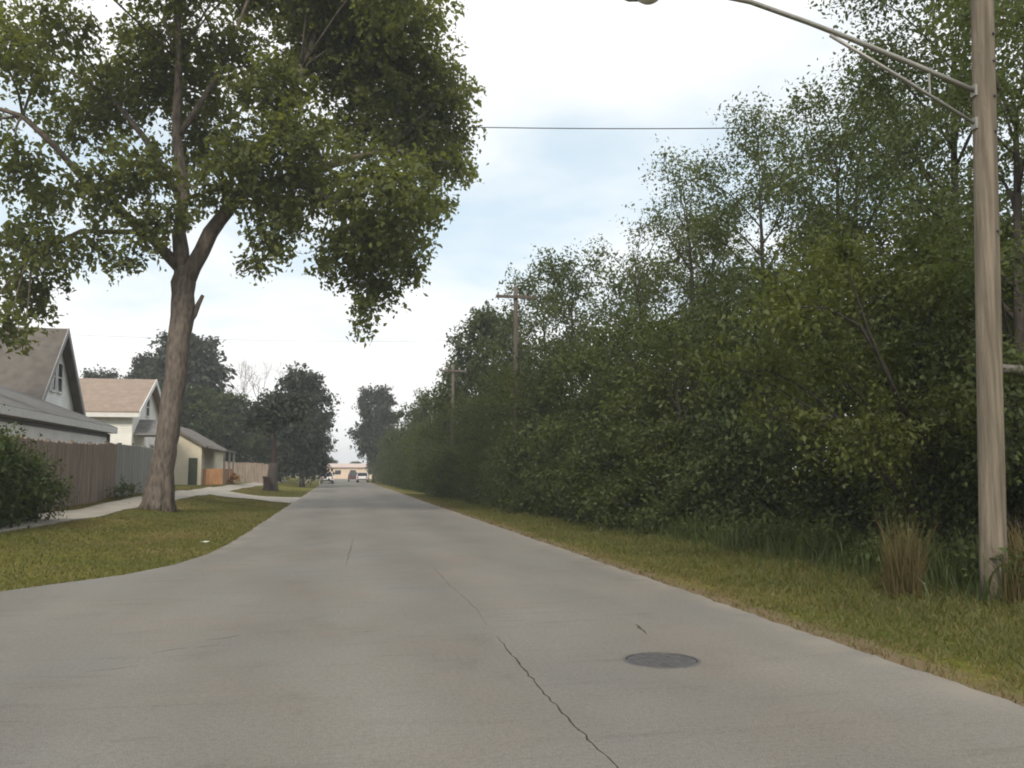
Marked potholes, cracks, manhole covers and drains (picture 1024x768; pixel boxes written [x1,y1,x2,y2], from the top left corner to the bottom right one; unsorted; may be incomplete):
crack [499,639,619,768]
manhole cover [622,652,702,669]
